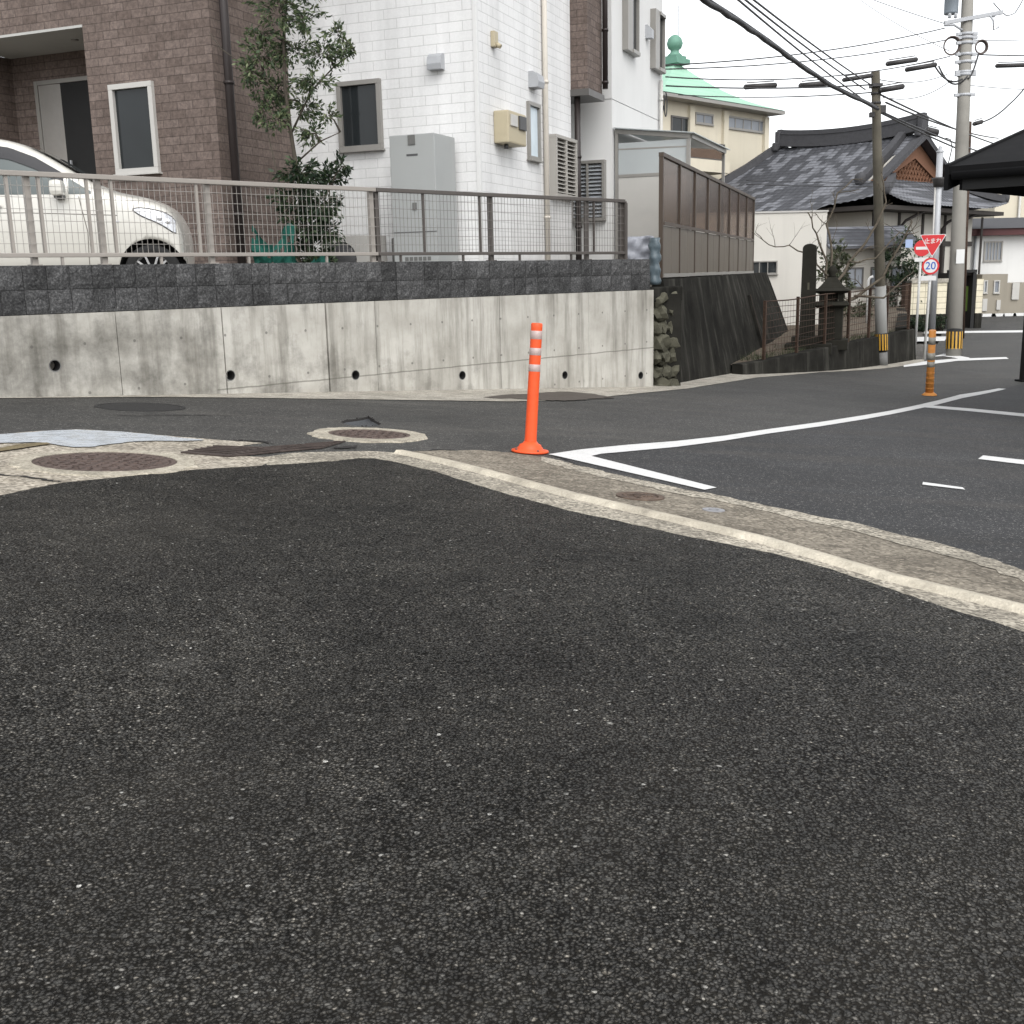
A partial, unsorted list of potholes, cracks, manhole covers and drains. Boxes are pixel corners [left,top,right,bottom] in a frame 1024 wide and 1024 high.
manhole cover [307,427,428,443]
manhole cover [7,449,198,477]
manhole cover [616,491,665,501]
manhole cover [94,402,186,412]
